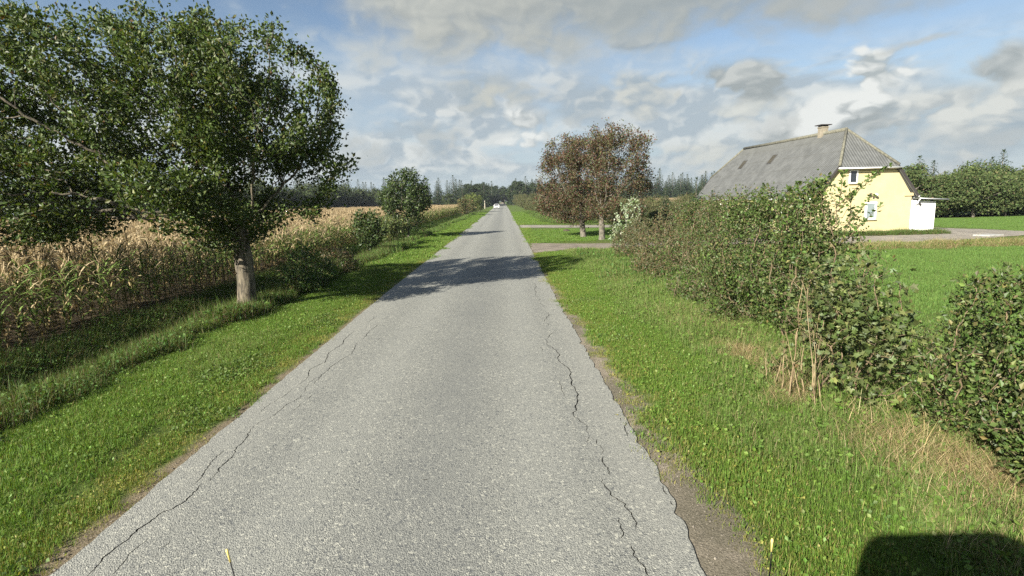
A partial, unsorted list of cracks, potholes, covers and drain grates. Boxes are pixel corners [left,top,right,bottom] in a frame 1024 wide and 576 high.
crack [87,316,380,576]
crack [534,283,649,576]
